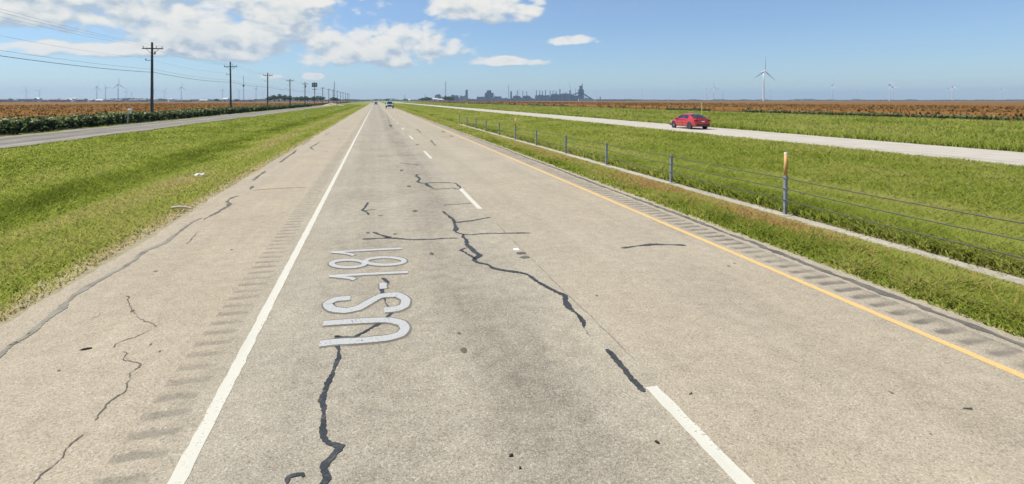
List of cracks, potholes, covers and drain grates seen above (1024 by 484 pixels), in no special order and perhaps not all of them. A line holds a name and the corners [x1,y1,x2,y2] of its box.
crack [33,296,156,484]
